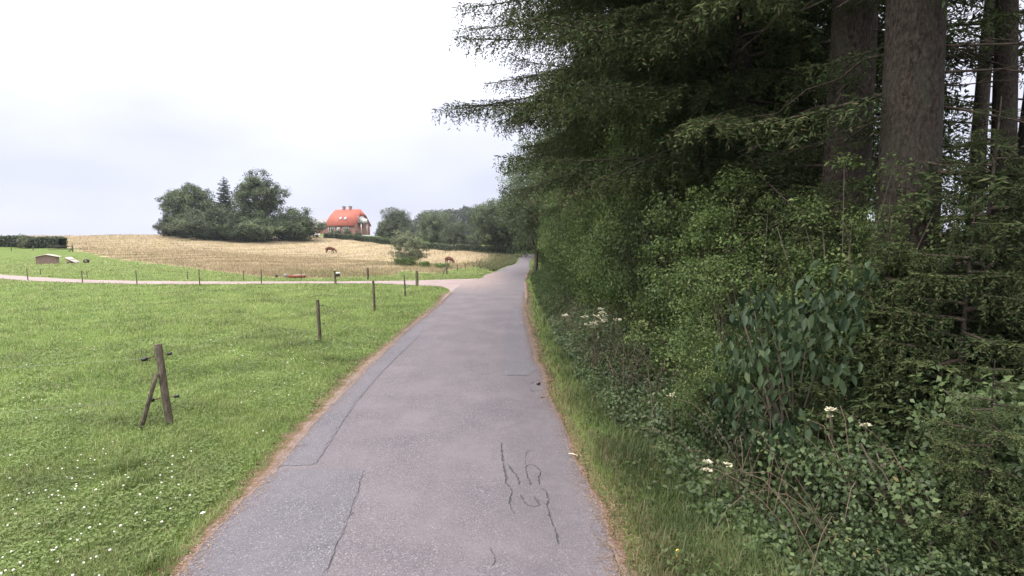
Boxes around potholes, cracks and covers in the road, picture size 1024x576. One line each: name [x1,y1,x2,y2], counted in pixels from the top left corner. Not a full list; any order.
crack [315,350,405,465]
crack [500,443,560,544]
crack [326,473,368,574]
